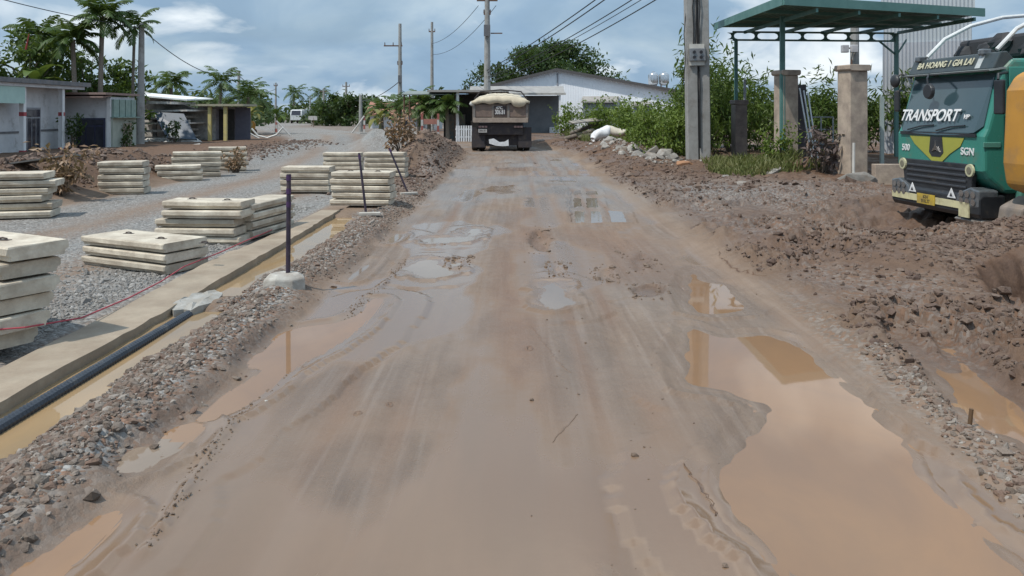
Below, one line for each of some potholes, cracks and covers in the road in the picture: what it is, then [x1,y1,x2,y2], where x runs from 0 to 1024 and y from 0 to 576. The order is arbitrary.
pothole [631,284,667,297]
pothole [681,270,757,317]
crack [553,414,578,442]
crack [683,463,718,516]
pothole [445,258,470,267]
pothole [526,230,556,252]
pothole [674,326,1024,576]
